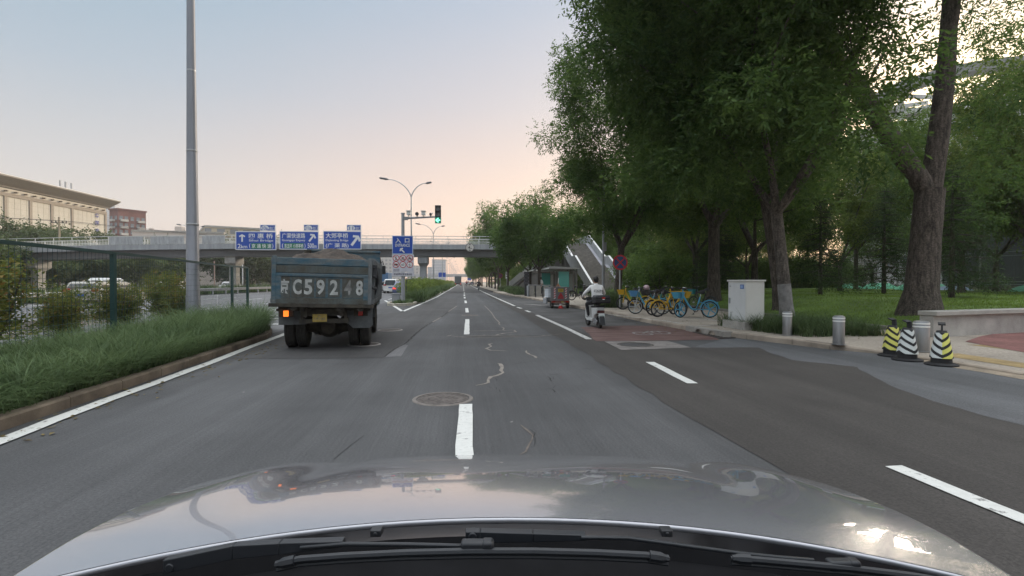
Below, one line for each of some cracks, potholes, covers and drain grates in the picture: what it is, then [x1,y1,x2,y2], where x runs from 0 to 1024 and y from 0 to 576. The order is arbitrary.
crack [432,306,571,393]
crack [521,425,535,454]
manhole cover [412,392,473,406]
